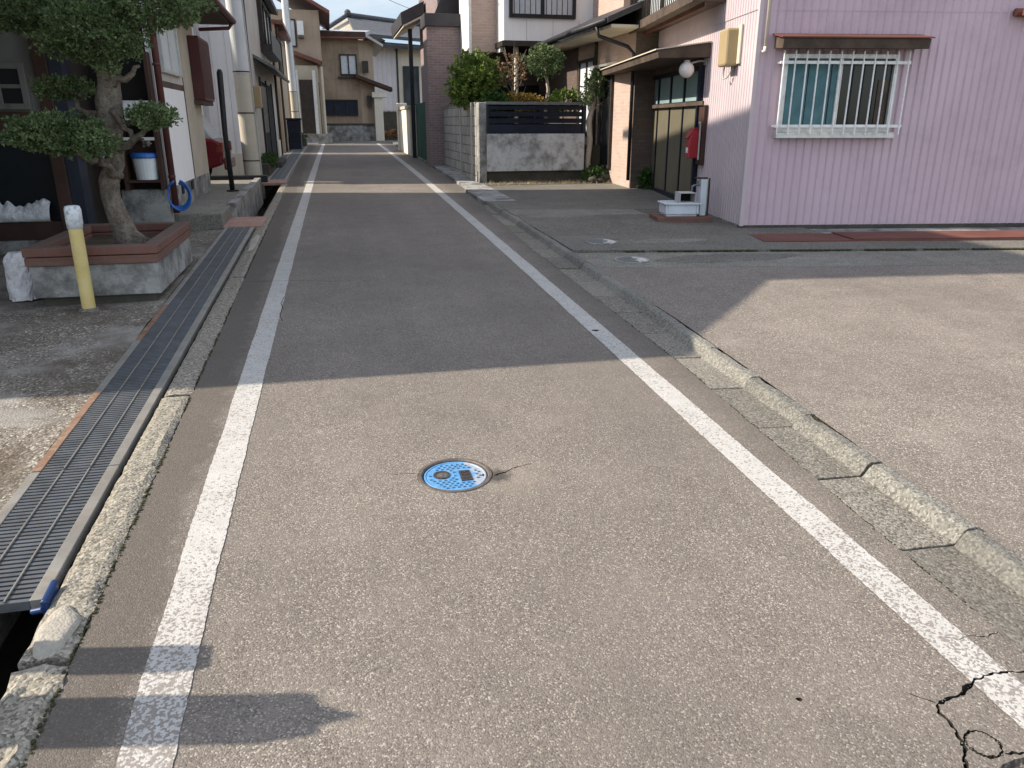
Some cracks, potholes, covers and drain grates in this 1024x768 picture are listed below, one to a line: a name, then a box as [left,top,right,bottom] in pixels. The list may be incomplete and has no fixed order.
crack [909,670,1024,768]
drain grate [163,275,227,308]
drain grate [186,255,238,279]
manhole cover [614,256,650,264]
drain grate [32,388,164,473]
drain grate [202,240,247,259]
drain grate [0,465,121,613]
drain grate [136,303,211,342]
drain grate [95,337,192,394]
drain grate [215,227,255,243]
manhole cover [418,458,493,493]
